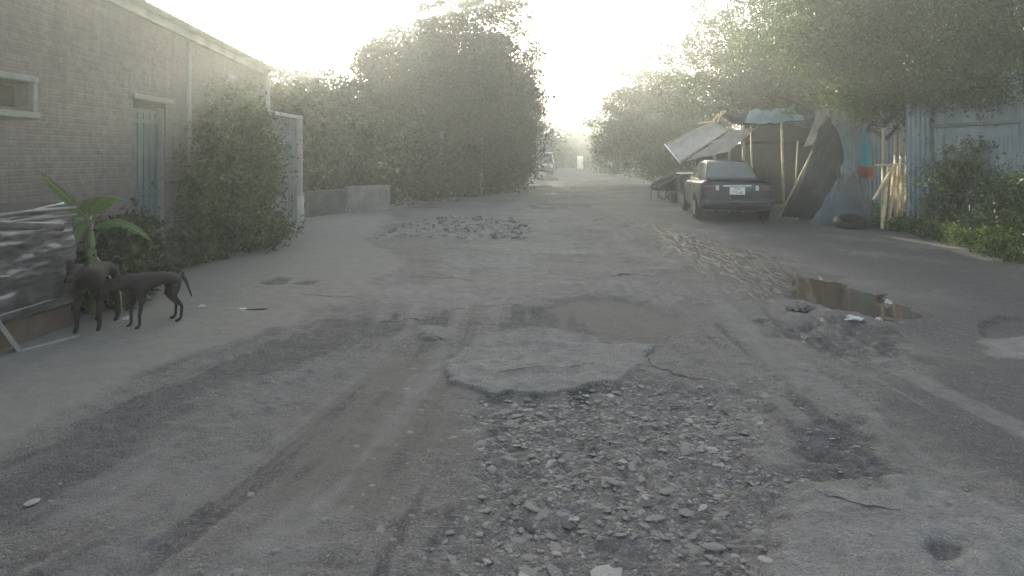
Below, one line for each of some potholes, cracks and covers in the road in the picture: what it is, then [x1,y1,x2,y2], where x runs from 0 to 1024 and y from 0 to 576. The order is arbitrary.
pothole [923,538,964,561]
crack [645,347,708,380]
pothole [423,382,806,576]
pothole [534,297,699,345]
pothole [978,317,1024,339]
pothole [786,417,890,482]
crack [815,489,898,510]
pothole [752,314,913,370]
